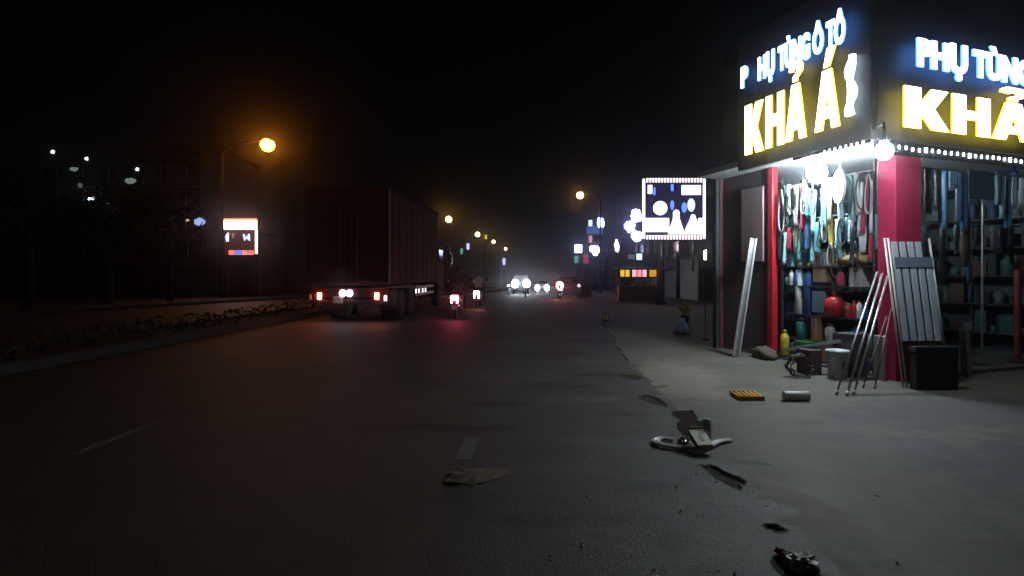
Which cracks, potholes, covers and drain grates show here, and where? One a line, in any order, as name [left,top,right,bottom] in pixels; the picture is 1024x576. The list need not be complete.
pothole [638,394,668,407]
pothole [699,464,747,491]
pothole [762,523,788,533]
